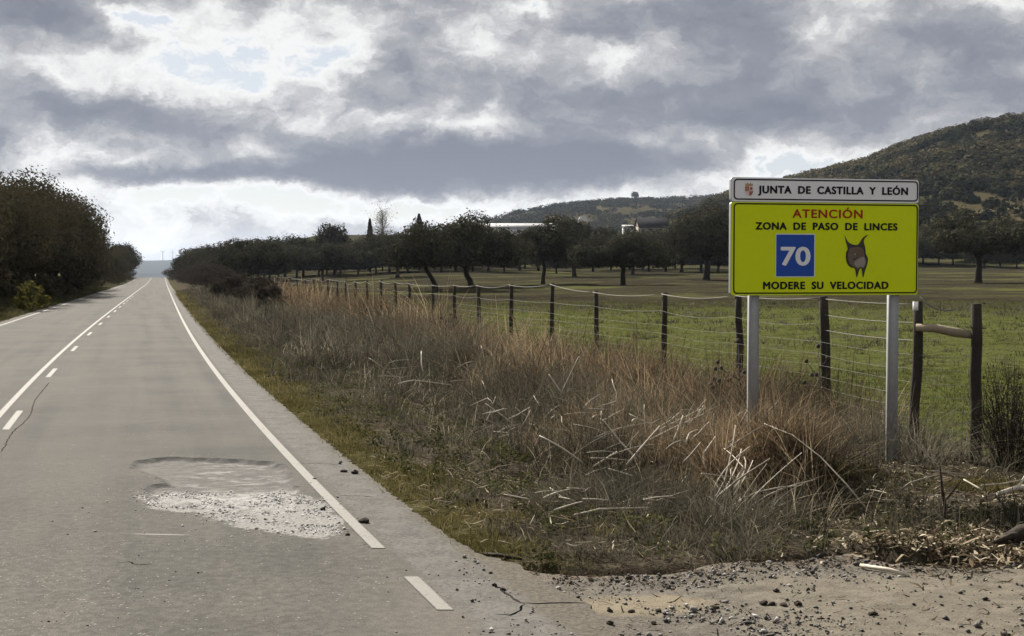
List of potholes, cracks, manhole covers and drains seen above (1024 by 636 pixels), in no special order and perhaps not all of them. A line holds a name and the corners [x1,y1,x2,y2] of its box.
pothole [126,457,302,515]
crack [1,383,49,452]
crack [495,586,578,616]
